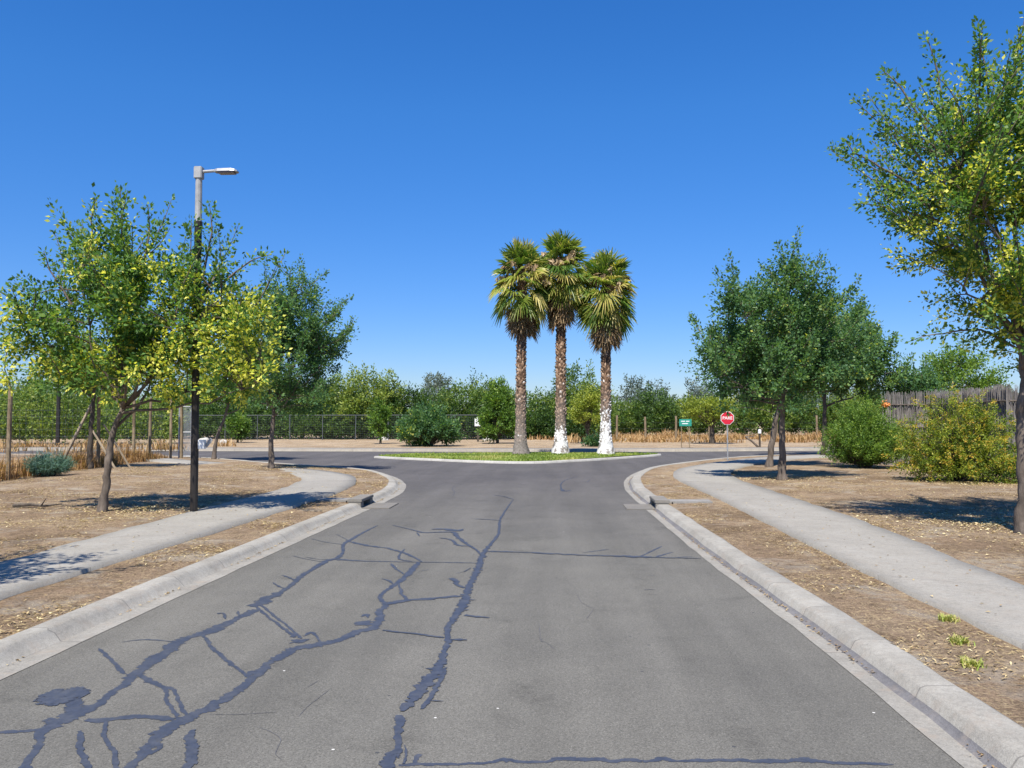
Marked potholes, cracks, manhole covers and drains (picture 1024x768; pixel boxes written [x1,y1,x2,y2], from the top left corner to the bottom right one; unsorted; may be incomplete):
drain grate [623,496,713,510]
crack [0,525,463,768]
drain grate [316,494,399,509]
